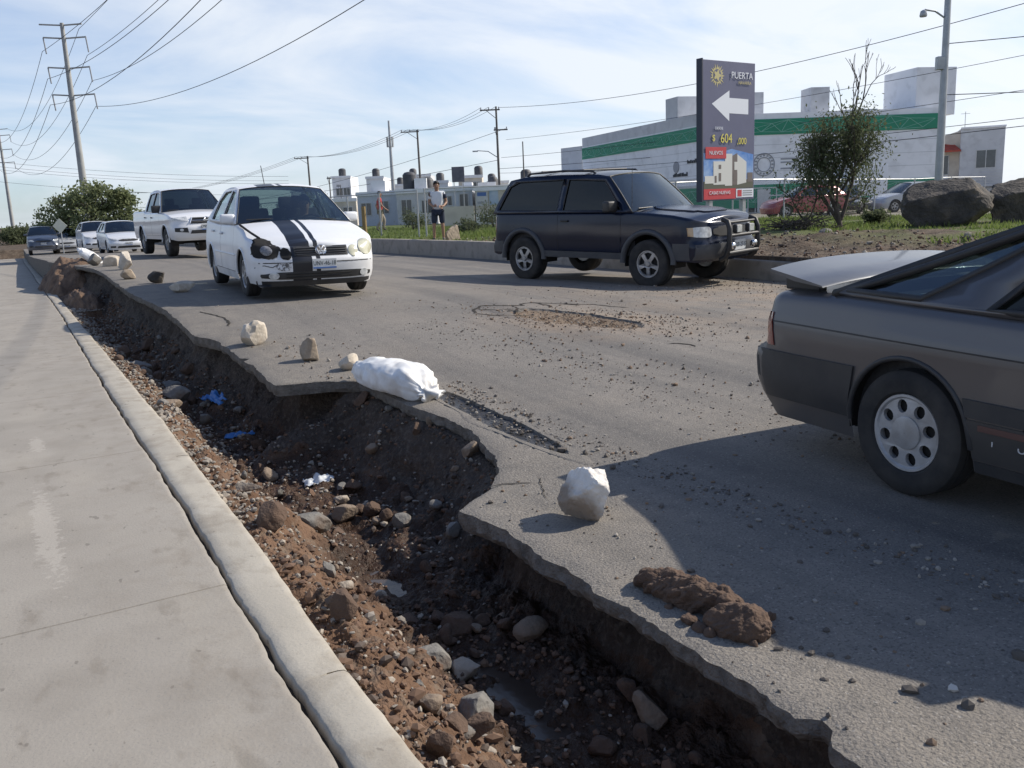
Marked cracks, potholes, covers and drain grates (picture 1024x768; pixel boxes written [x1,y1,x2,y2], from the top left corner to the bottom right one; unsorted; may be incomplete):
pothole [489,306,670,333]
crack [490,477,546,498]
